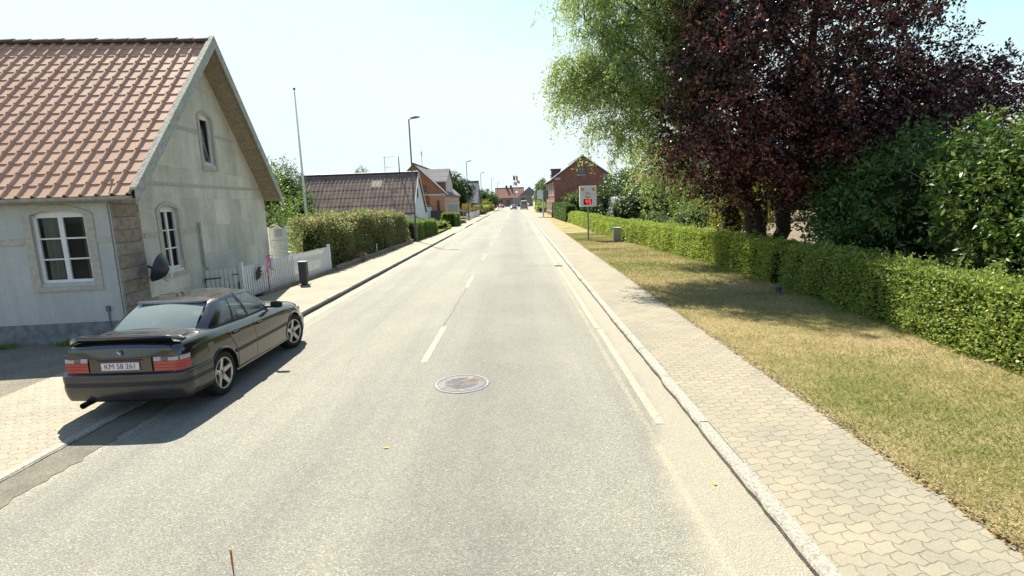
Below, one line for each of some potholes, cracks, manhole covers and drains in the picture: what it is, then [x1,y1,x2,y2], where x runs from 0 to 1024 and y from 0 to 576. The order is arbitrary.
manhole cover [433,374,490,393]
